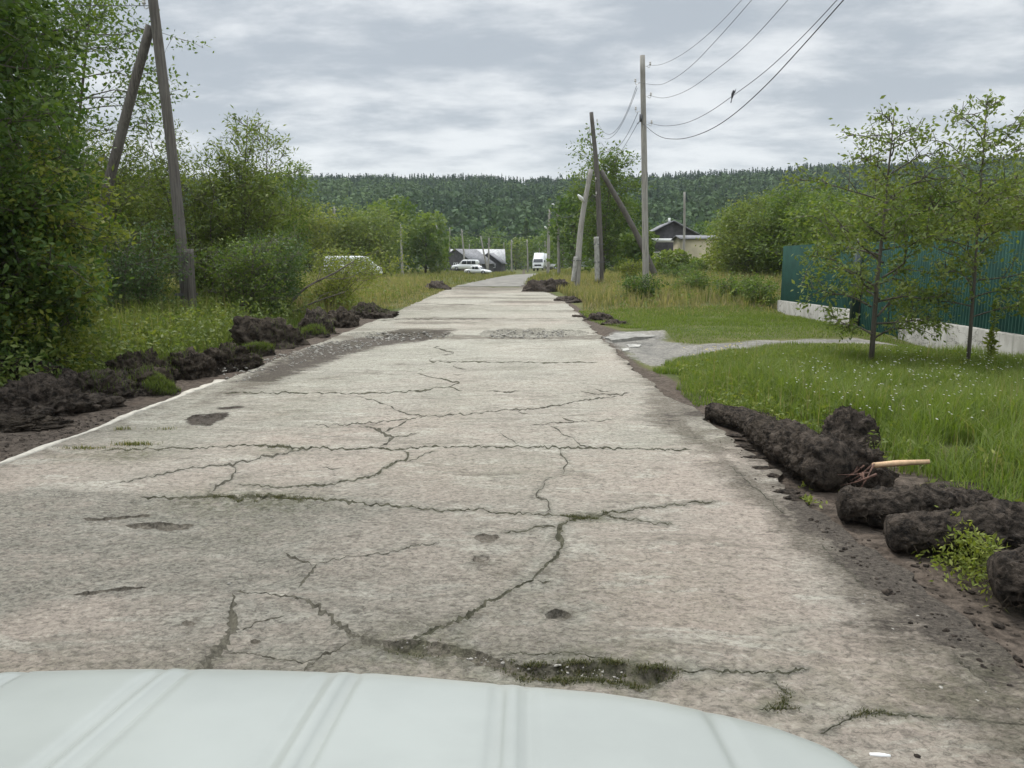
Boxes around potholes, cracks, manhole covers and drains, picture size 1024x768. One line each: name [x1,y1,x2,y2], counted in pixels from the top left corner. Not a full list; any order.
pothole [126,522,194,532]
crack [119,389,713,660]
pothole [472,555,490,565]
pothole [545,609,571,621]
pothole [383,638,684,692]
pothole [187,413,227,426]
crack [760,682,802,713]
pothole [474,533,500,543]
